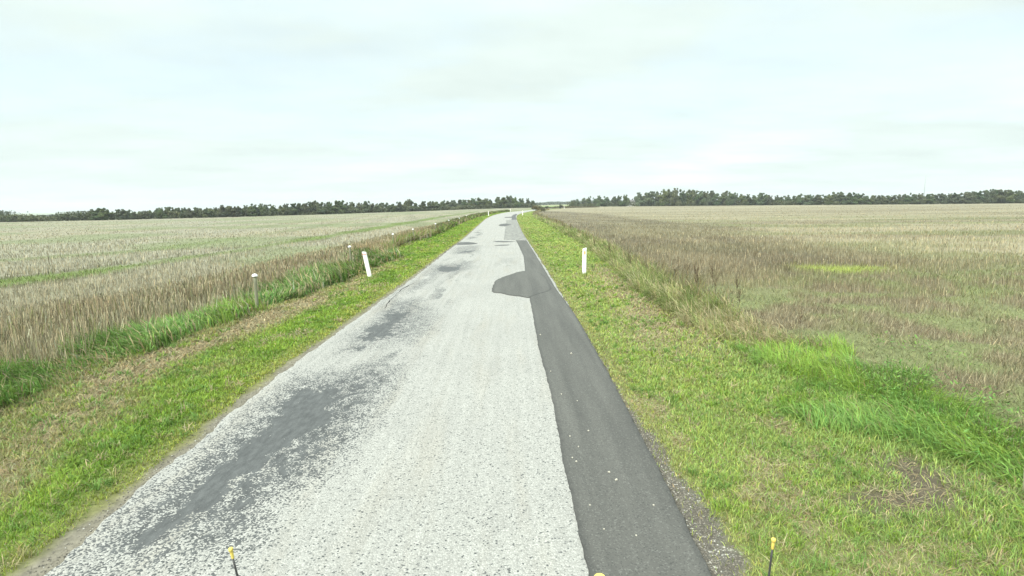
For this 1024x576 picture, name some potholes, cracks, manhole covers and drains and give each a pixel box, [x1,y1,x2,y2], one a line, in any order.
crack [382,280,421,311]
